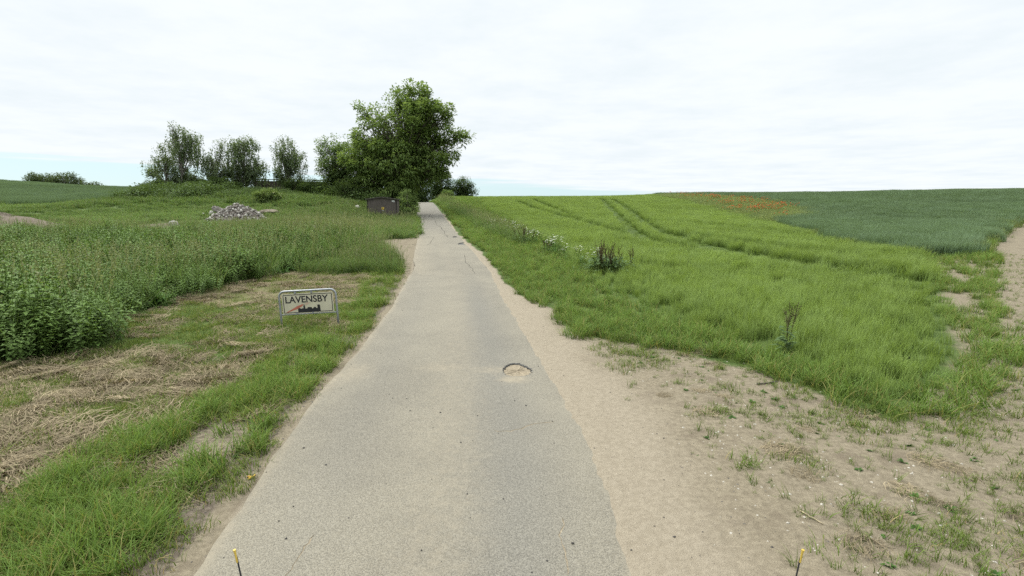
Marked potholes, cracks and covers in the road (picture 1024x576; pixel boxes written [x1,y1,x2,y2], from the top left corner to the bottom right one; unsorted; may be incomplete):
pothole [502,363,533,376]
crack [285,535,314,576]
